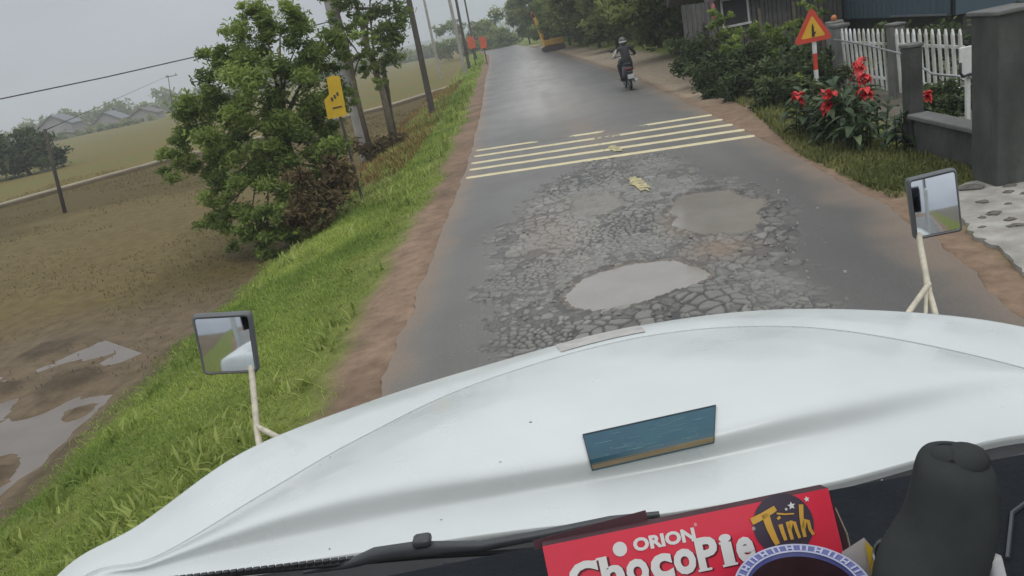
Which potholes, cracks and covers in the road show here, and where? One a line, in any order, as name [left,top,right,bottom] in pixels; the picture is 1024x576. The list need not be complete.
pothole [665,188,773,237]
crack [470,151,841,362]
pothole [558,258,717,312]
pothole [568,191,629,217]
